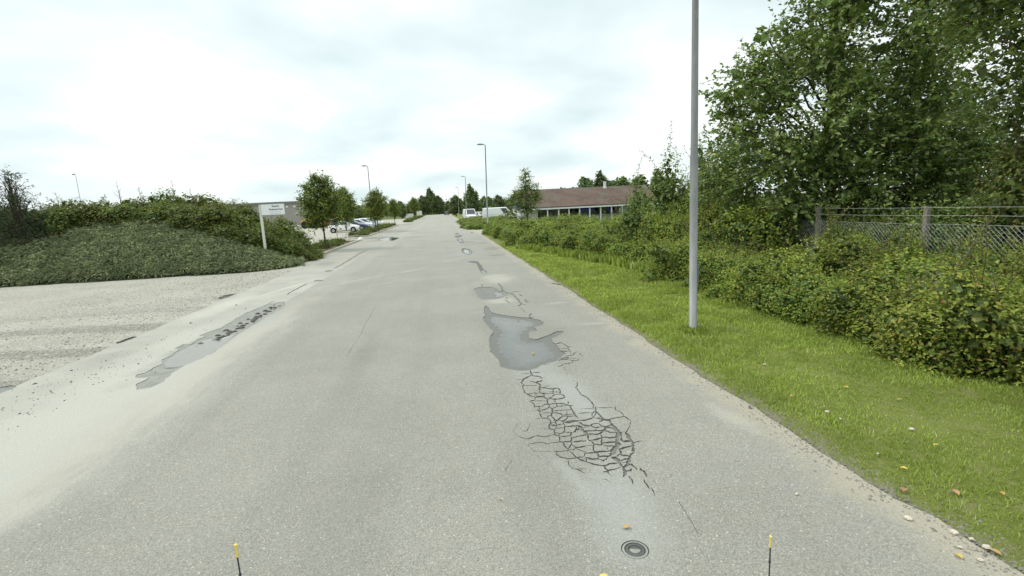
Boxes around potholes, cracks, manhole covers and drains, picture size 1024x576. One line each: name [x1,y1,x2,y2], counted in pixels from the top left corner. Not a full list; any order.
manhole cover [621,540,649,559]
crack [505,342,655,495]
